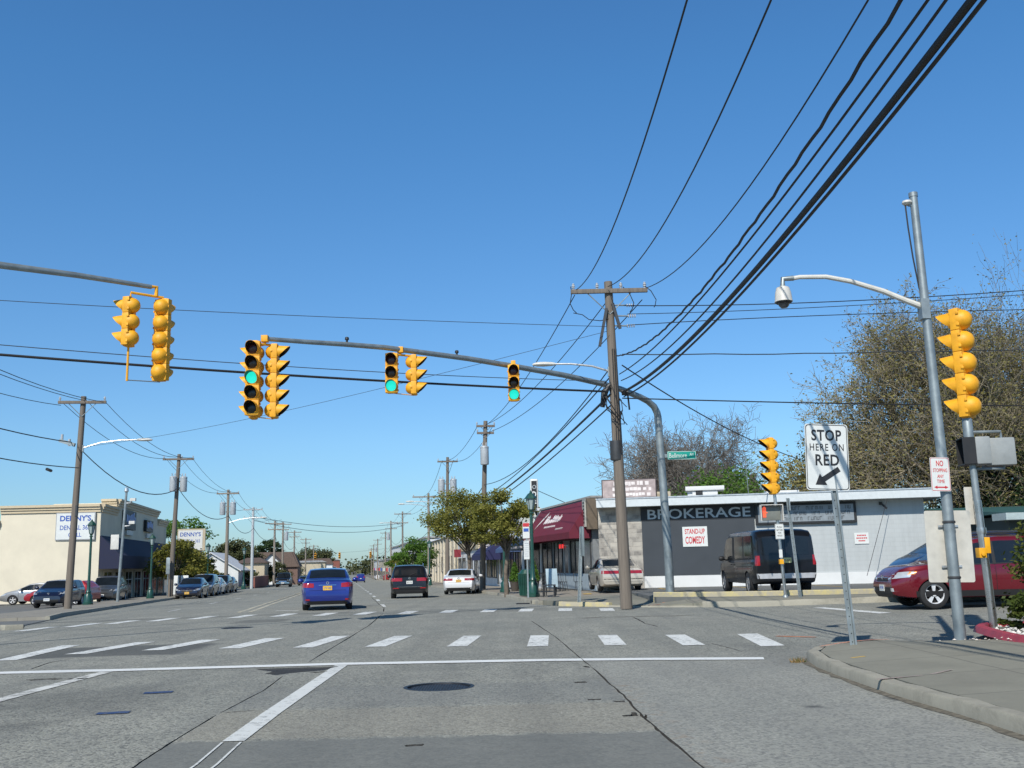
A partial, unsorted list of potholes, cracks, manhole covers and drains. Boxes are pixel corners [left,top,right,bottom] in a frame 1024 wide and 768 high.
manhole cover [403,682,474,691]
